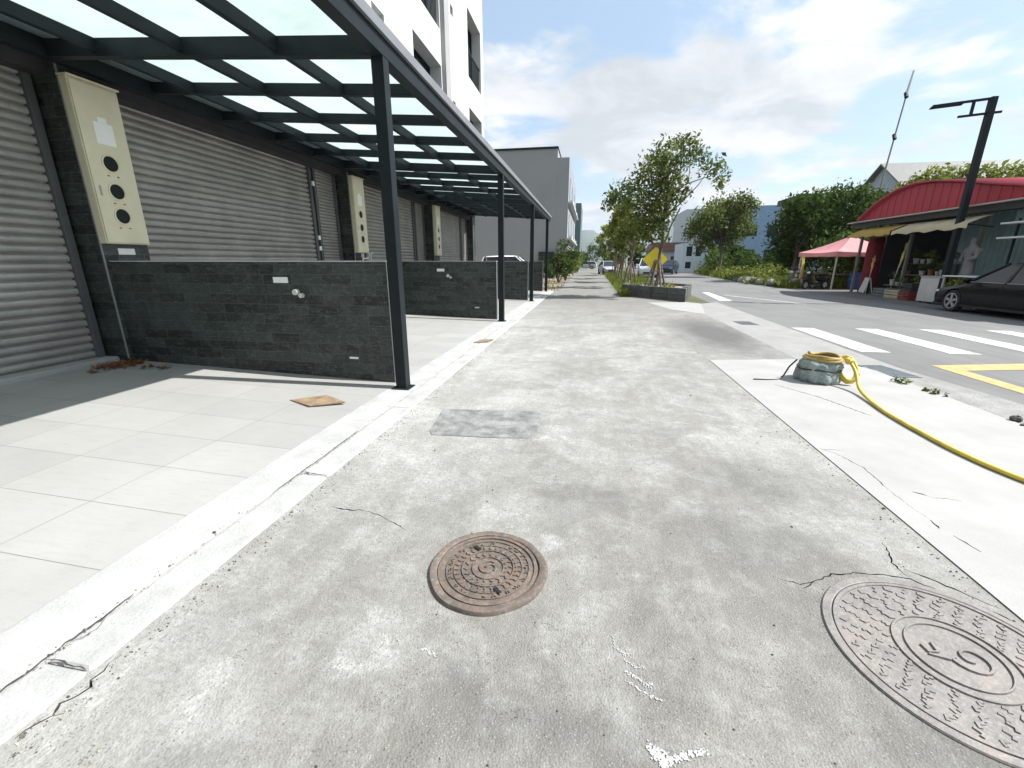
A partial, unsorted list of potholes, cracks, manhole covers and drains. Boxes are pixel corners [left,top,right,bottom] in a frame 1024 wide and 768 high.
crack [778,542,1024,628]
manhole cover [821,577,1024,768]
manhole cover [429,531,548,617]
crack [0,593,134,739]
